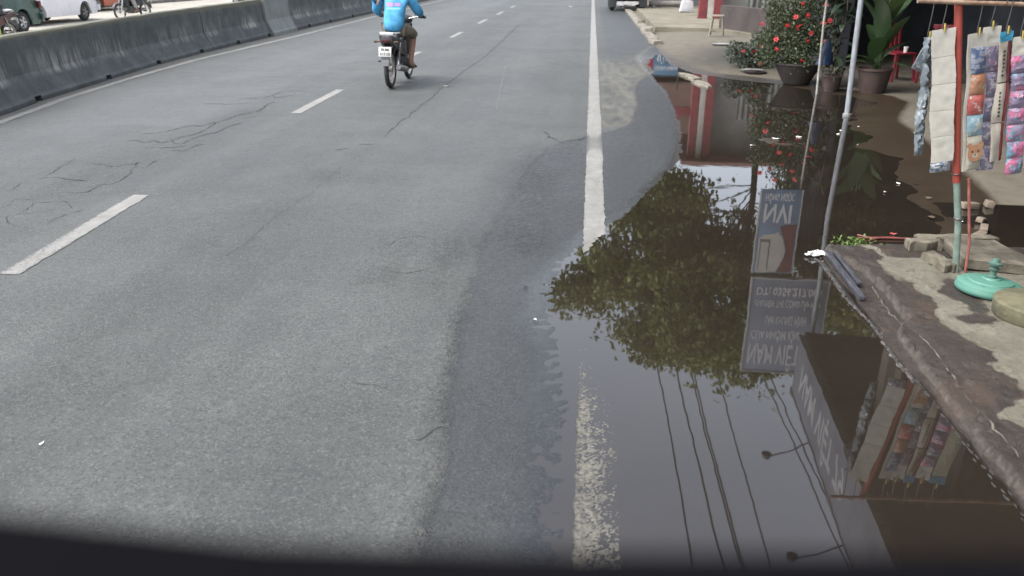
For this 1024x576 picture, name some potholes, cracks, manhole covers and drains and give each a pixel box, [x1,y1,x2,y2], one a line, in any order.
crack [386,27,516,135]
crack [0,90,301,226]
